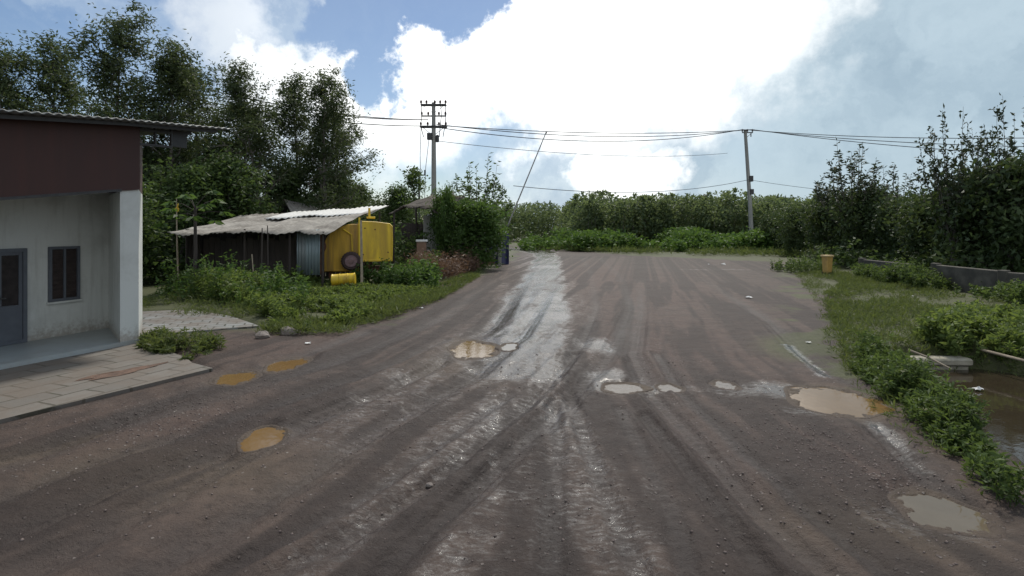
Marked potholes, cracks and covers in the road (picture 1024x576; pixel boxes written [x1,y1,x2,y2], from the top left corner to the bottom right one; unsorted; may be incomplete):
pothole [783,385,902,419]
pothole [654,381,687,393]
pothole [235,424,291,454]
pothole [208,370,263,387]
pothole [600,382,654,395]
pothole [447,339,502,361]
pothole [262,357,314,374]
pothole [495,342,519,352]
pothole [708,379,743,391]
pothole [887,486,1007,539]
